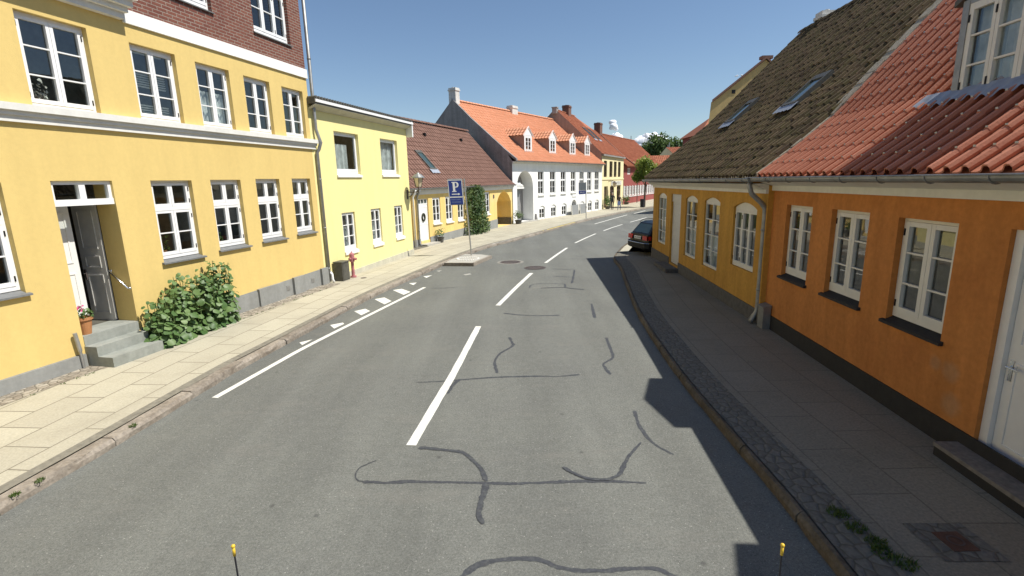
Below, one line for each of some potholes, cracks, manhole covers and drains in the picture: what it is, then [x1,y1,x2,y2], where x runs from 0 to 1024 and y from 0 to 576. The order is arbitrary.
utility cover [902,523,1010,561]
